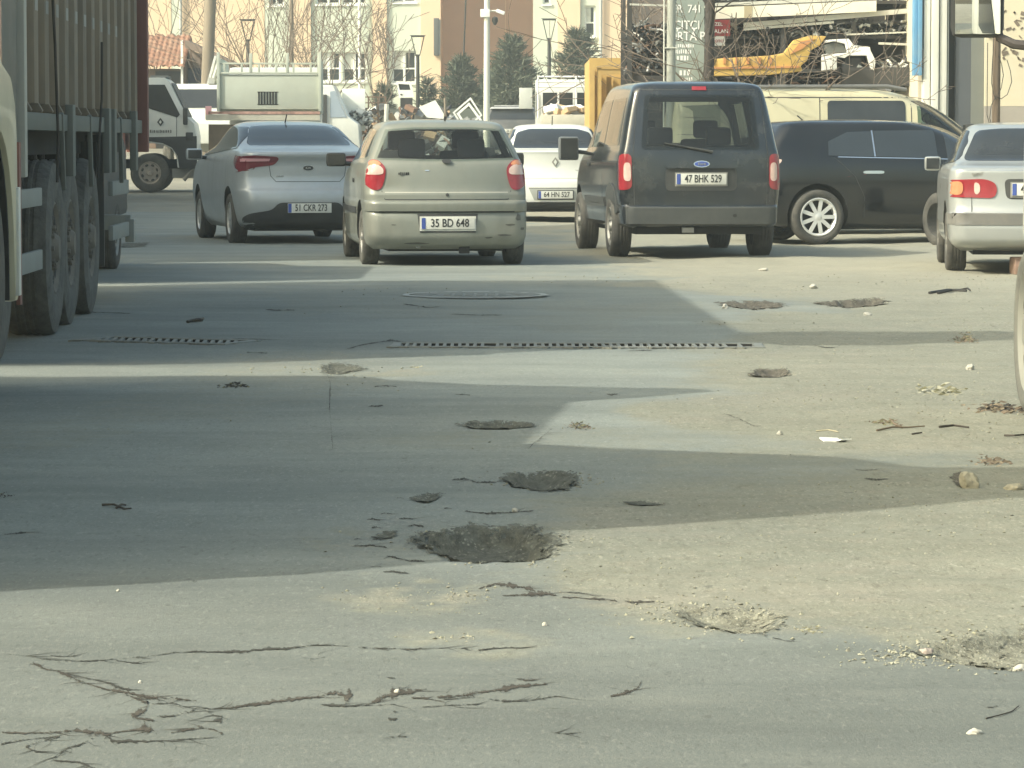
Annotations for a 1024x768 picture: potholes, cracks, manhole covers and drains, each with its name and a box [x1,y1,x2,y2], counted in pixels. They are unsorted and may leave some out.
crack [1,642,593,768]
crack [611,682,656,696]
pothole [667,607,788,636]
pothole [320,362,366,374]
pothole [748,368,791,378]
pothole [407,522,571,564]
pothole [916,627,1024,671]
crack [478,582,655,605]
pothole [409,493,443,502]
pothole [455,420,535,430]
pothole [713,300,783,310]
pothole [499,470,581,491]
